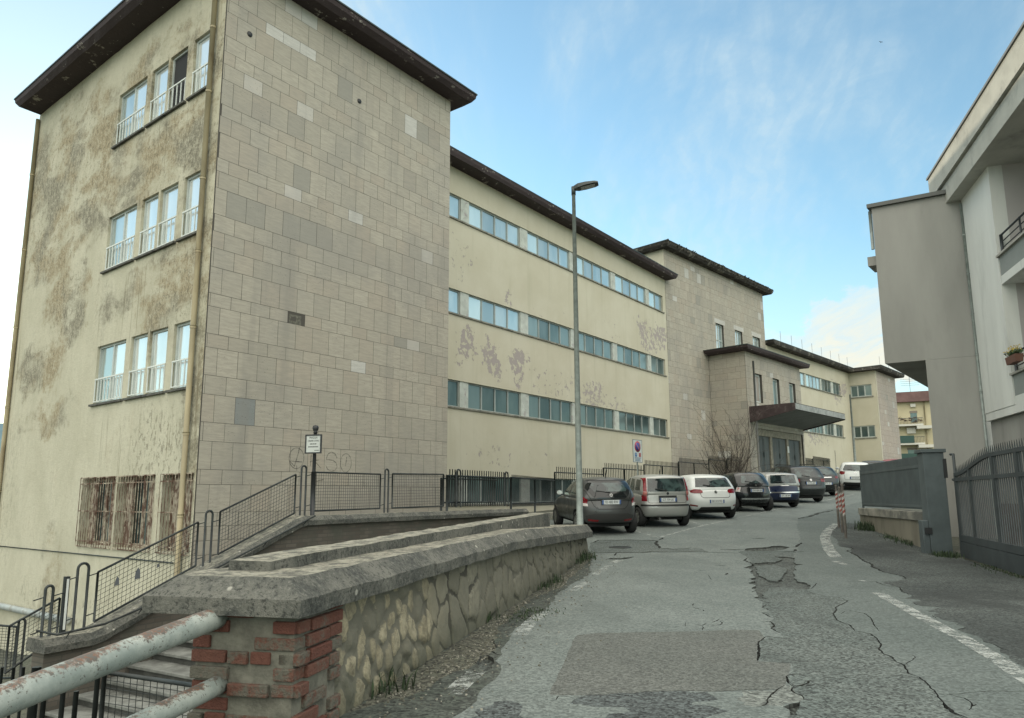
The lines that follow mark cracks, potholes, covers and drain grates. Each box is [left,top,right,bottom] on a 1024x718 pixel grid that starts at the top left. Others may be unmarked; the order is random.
crack [757,599,782,661]
crack [700,538,800,579]
crack [812,546,976,718]
crack [758,662,833,707]
